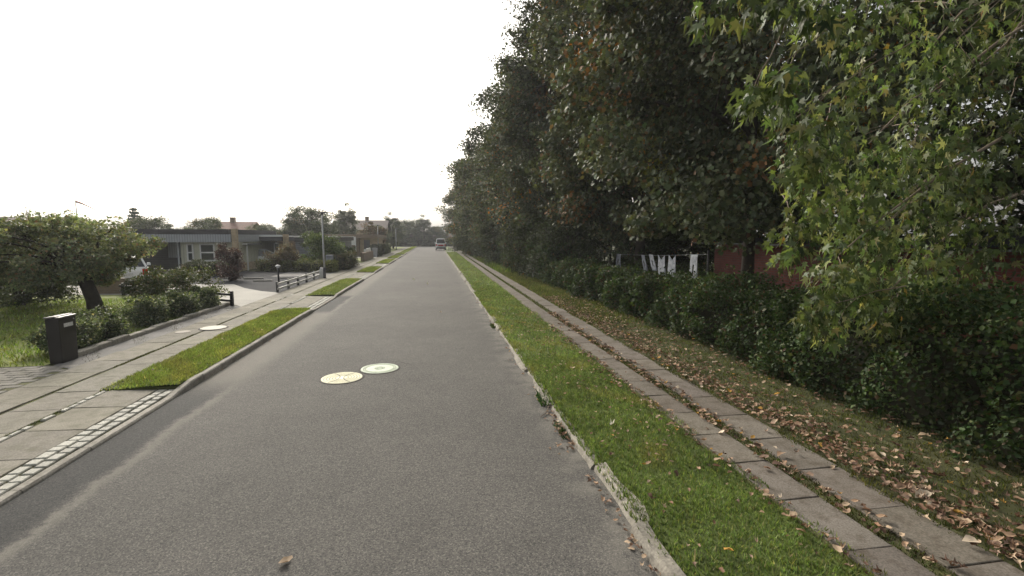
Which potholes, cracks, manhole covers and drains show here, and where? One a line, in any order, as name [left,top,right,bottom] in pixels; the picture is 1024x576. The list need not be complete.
manhole cover [318,372,365,385]
manhole cover [358,363,401,374]
